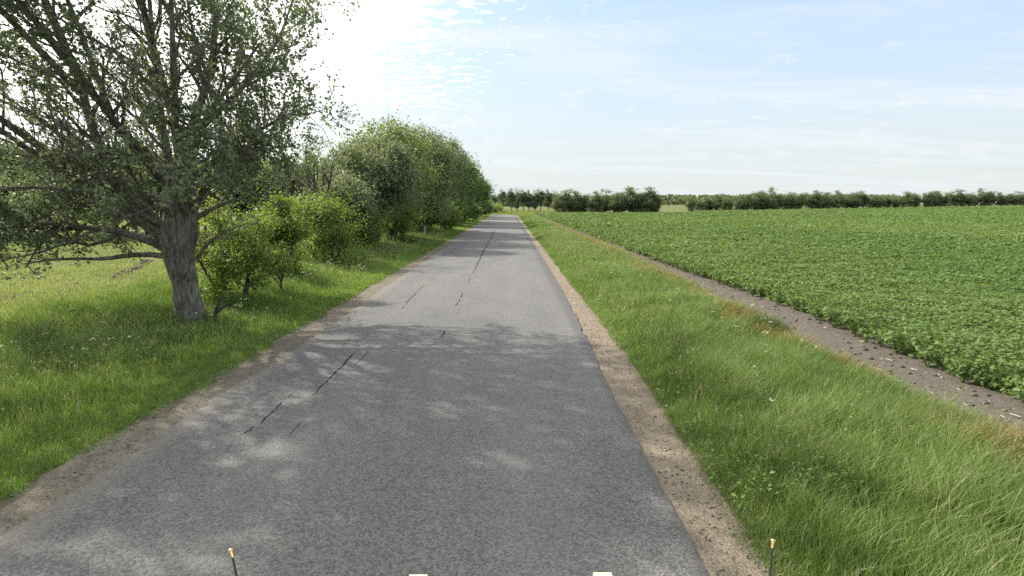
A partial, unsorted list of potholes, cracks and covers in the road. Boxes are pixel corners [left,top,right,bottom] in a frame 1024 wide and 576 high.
crack [242,394,302,437]
crack [313,338,369,395]
